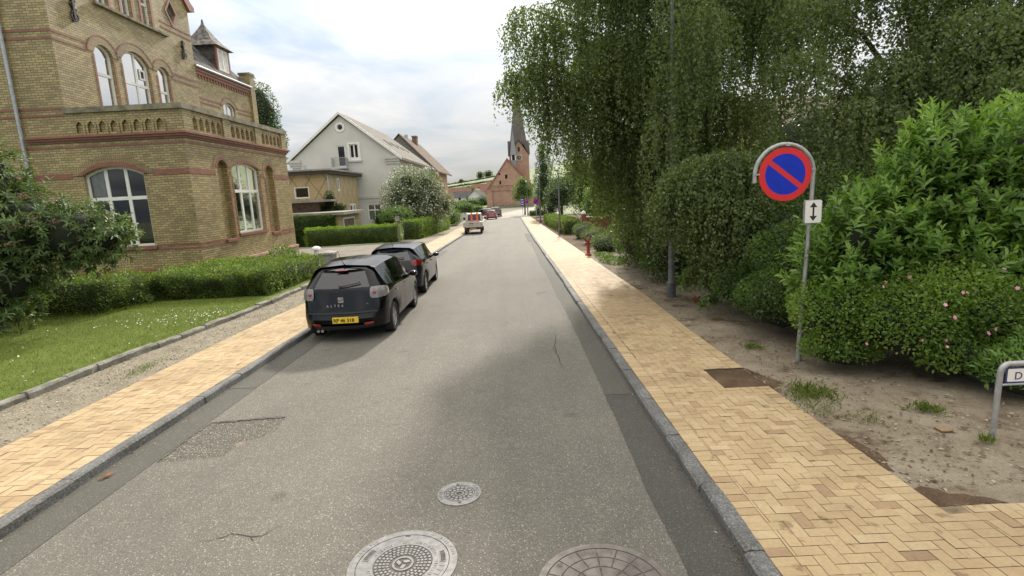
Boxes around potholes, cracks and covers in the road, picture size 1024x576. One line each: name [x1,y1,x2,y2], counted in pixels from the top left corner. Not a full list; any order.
manhole cover [346,530,458,576]
manhole cover [539,544,669,576]
manhole cover [437,482,481,506]
